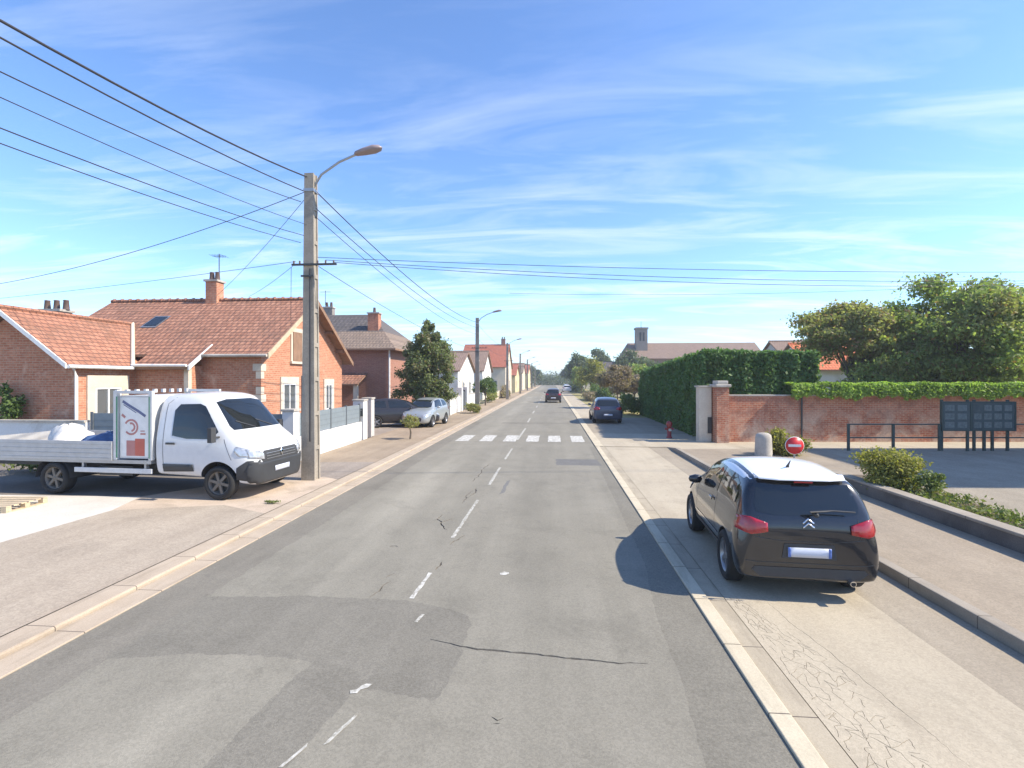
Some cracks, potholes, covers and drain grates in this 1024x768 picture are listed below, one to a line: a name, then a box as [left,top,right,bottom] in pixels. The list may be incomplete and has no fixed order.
crack [430,639,646,664]
crack [437,464,489,544]
crack [729,597,970,768]
